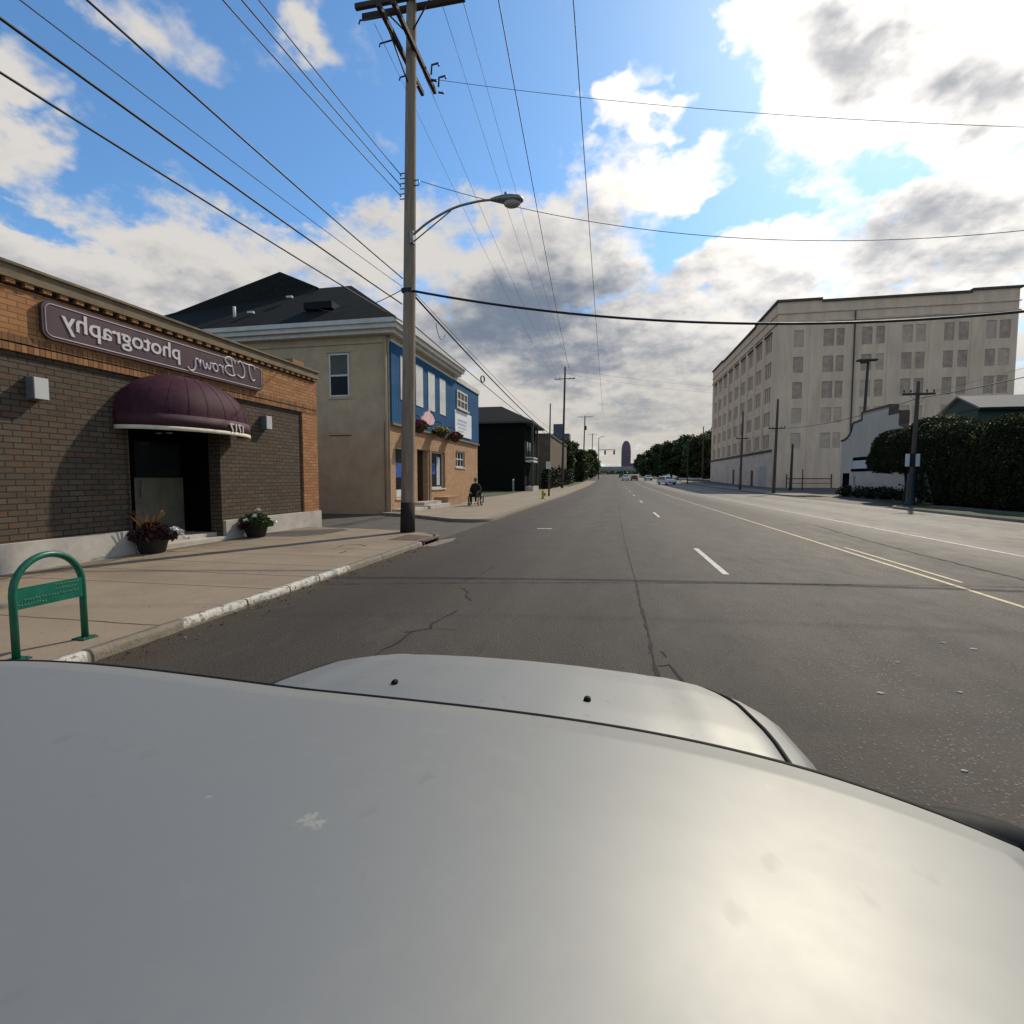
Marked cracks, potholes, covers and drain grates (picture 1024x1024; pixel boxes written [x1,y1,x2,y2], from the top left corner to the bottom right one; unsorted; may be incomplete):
drain grate [389,535,439,546]
crack [374,566,494,656]
